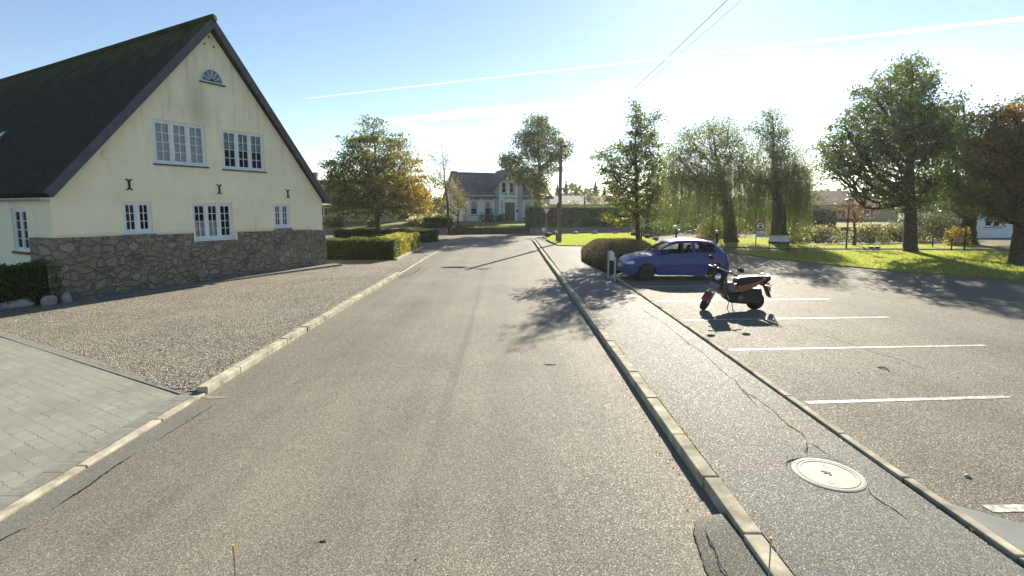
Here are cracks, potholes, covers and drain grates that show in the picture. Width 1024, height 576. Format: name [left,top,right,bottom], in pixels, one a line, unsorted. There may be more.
crack [638,306,847,466]
manhole cover [791,458,867,493]
